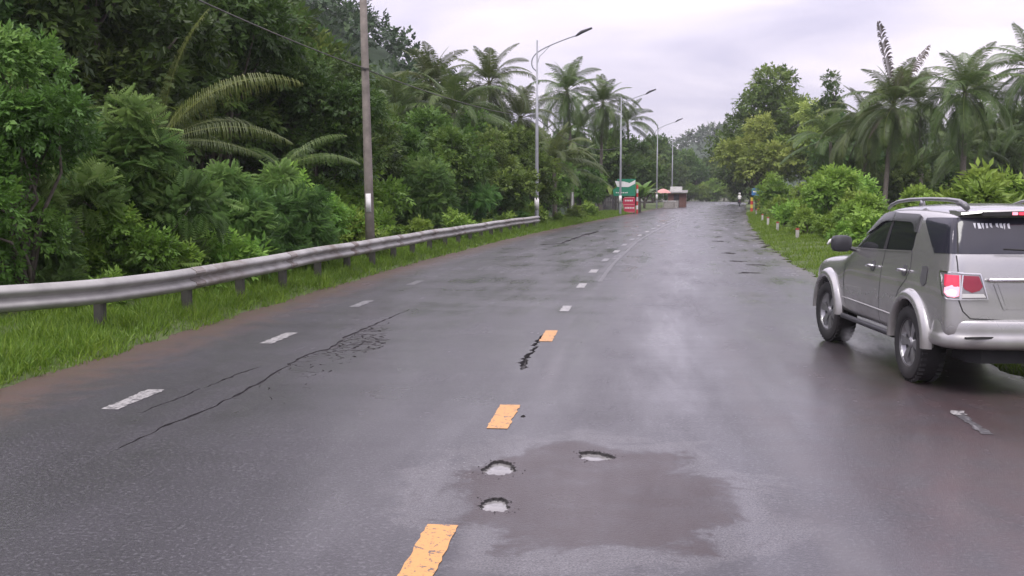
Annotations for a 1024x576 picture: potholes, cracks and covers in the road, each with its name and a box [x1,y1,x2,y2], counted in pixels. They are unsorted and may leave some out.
pothole [472,494,519,514]
crack [541,231,599,245]
pothole [573,450,625,462]
pothole [472,460,526,479]
crack [517,335,543,370]
crack [113,310,408,451]
